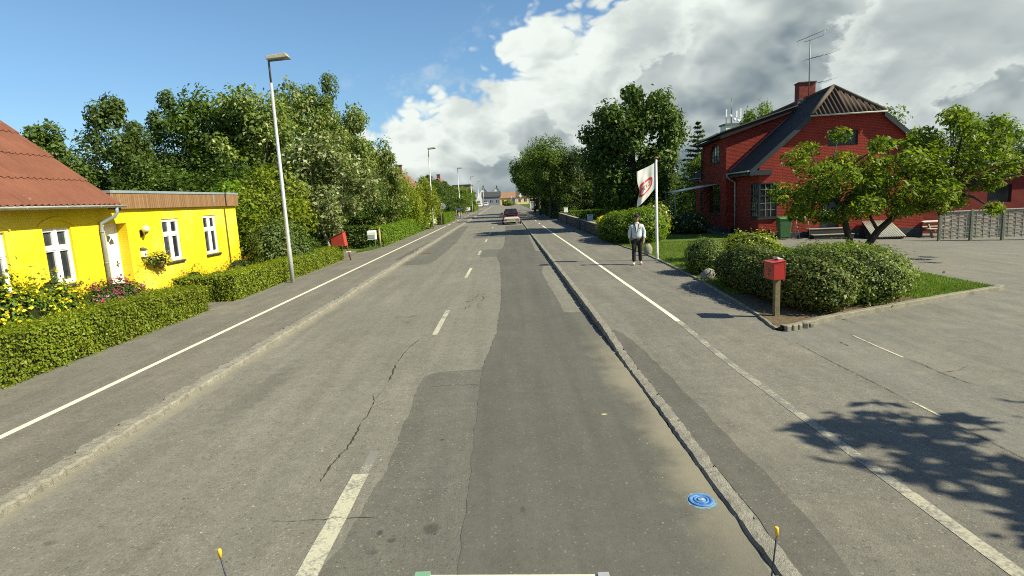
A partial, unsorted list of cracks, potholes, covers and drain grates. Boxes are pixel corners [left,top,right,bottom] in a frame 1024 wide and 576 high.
crack [319,340,419,483]
